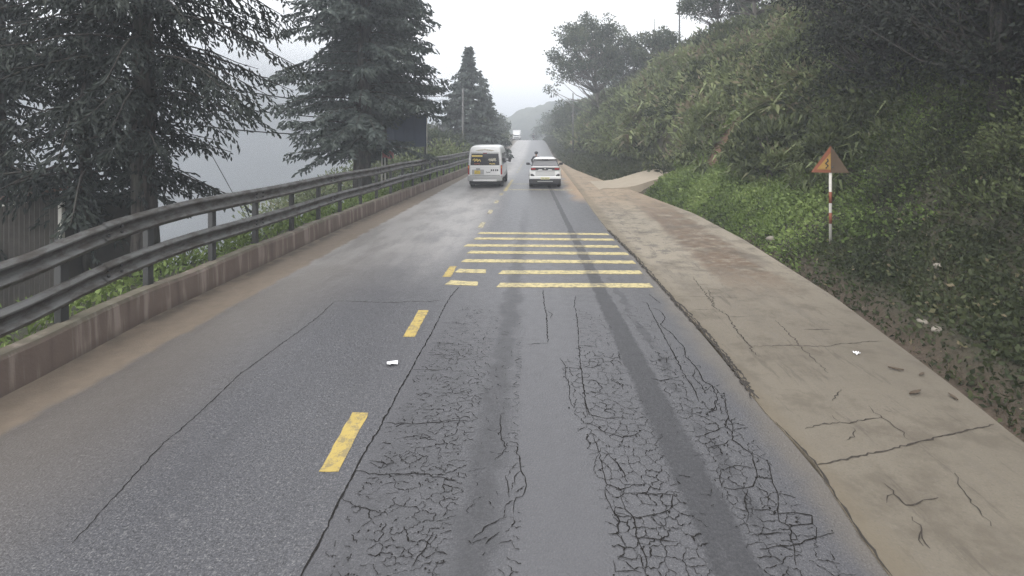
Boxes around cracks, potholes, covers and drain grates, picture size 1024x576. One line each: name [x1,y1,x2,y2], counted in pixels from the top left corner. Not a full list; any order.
crack [562,230,938,576]
crack [300,287,527,576]
